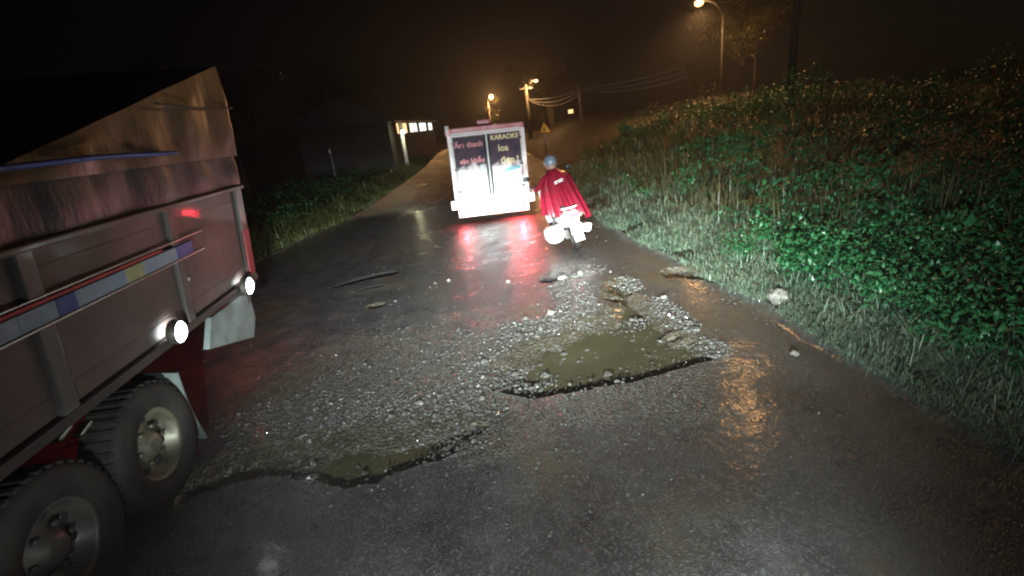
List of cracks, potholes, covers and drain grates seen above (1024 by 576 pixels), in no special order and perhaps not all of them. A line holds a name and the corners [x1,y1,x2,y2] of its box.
pothole [172,414,488,509]
pothole [485,273,723,394]
